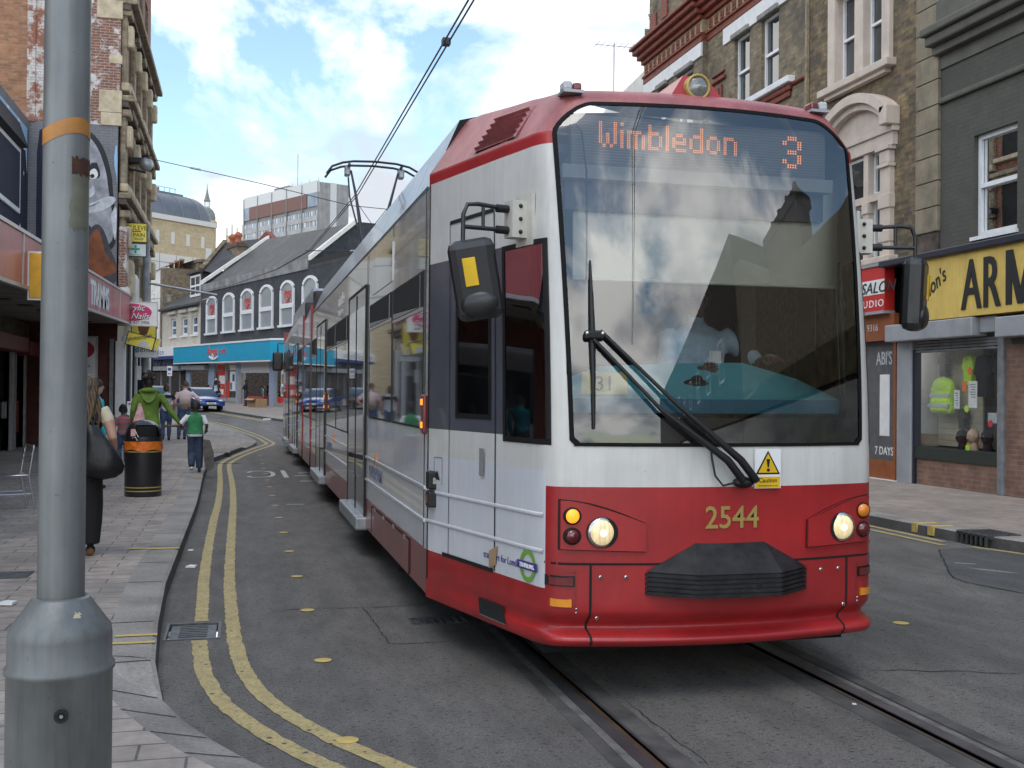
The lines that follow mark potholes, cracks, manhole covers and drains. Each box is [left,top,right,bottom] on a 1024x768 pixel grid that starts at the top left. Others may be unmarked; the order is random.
drain grate [408,615,479,625]
crack [275,604,460,645]
drain grate [162,621,221,641]
